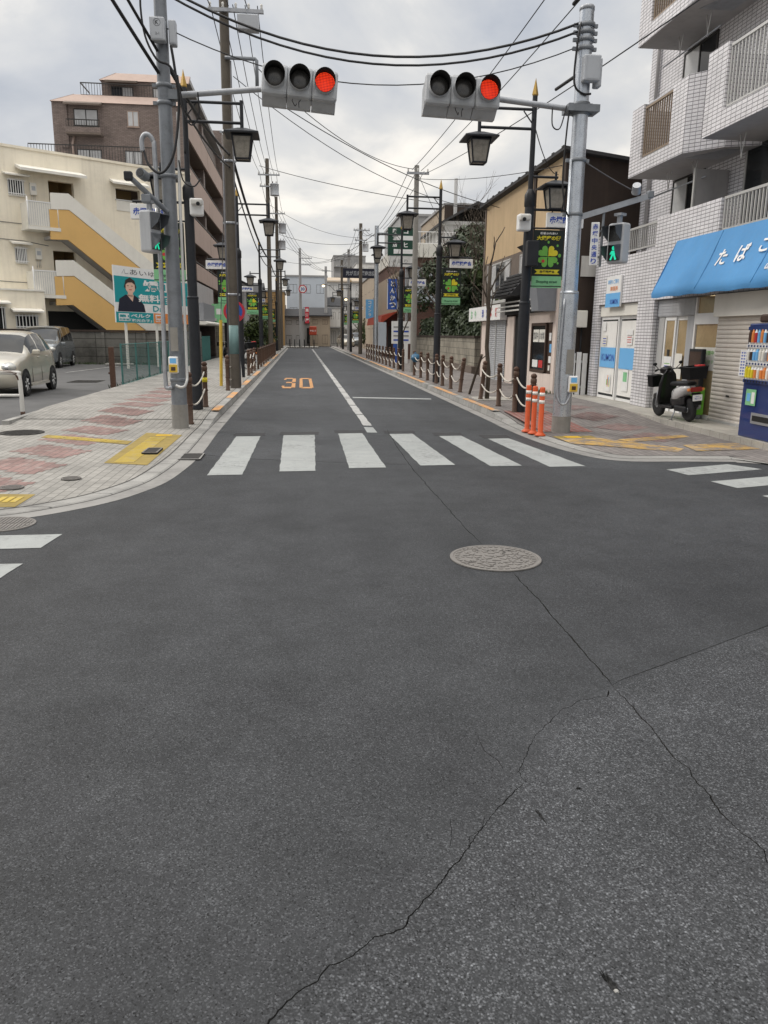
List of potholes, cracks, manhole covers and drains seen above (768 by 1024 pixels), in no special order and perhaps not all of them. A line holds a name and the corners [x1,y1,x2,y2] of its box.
crack [267,573,768,1024]
manhole cover [0,517,36,532]
manhole cover [450,545,542,572]
